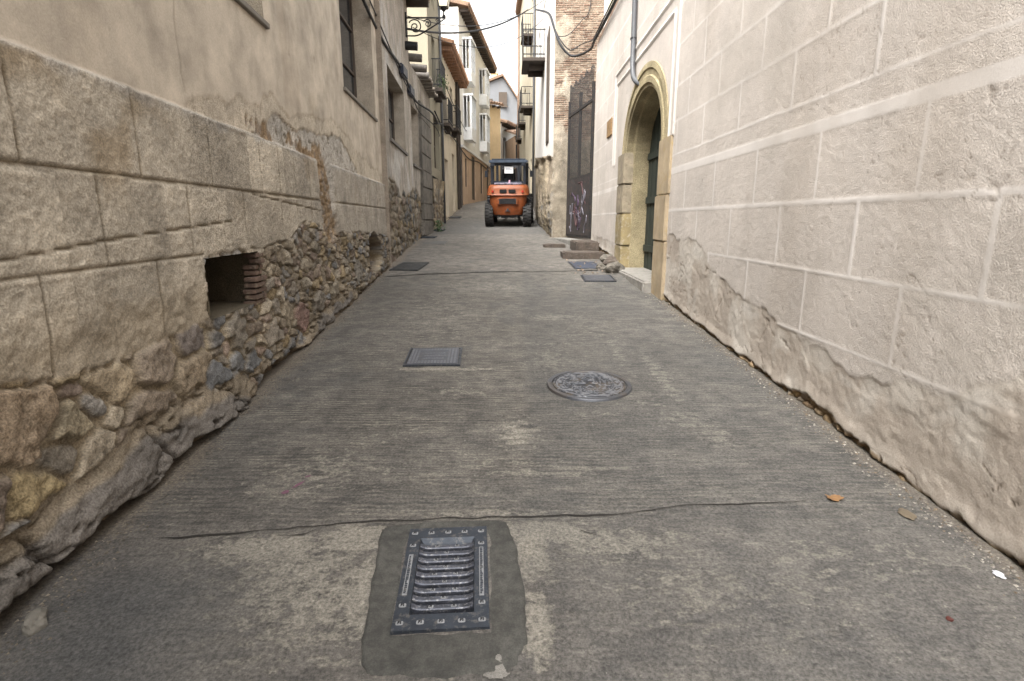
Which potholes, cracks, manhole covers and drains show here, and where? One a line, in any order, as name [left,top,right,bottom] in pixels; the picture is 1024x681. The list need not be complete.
crack [166,500,804,538]
utility cover [568,261,597,269]
manhole cover [546,370,632,402]
utility cover [389,262,429,271]
drain grate [390,526,490,635]
utility cover [403,347,462,367]
